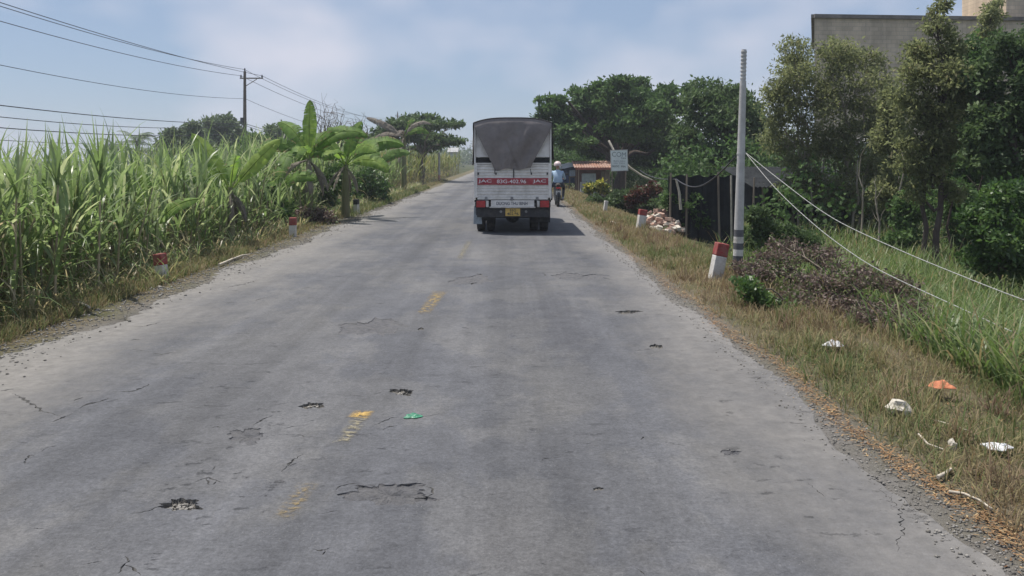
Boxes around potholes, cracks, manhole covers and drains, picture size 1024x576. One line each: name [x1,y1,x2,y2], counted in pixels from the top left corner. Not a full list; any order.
crack [880,490,905,550]
pothole [158,498,203,511]
crack [400,483,434,499]
